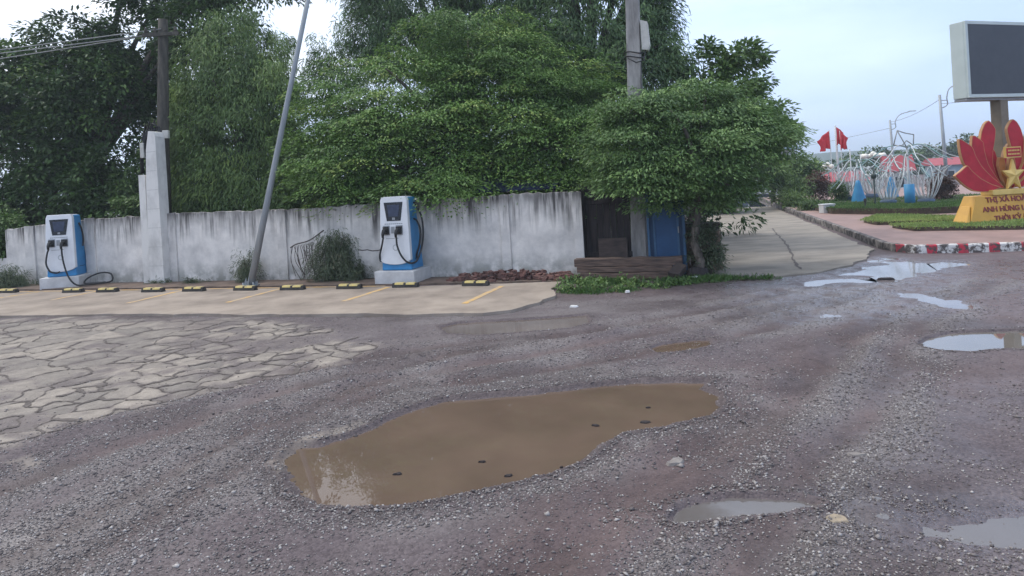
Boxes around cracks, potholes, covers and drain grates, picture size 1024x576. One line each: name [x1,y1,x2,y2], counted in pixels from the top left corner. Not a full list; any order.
crack [772,228,802,269]
pothole [437,314,593,336]
pothole [646,338,717,353]
pothole [272,376,728,510]
pothole [662,489,830,526]
pothole [913,328,1024,352]
